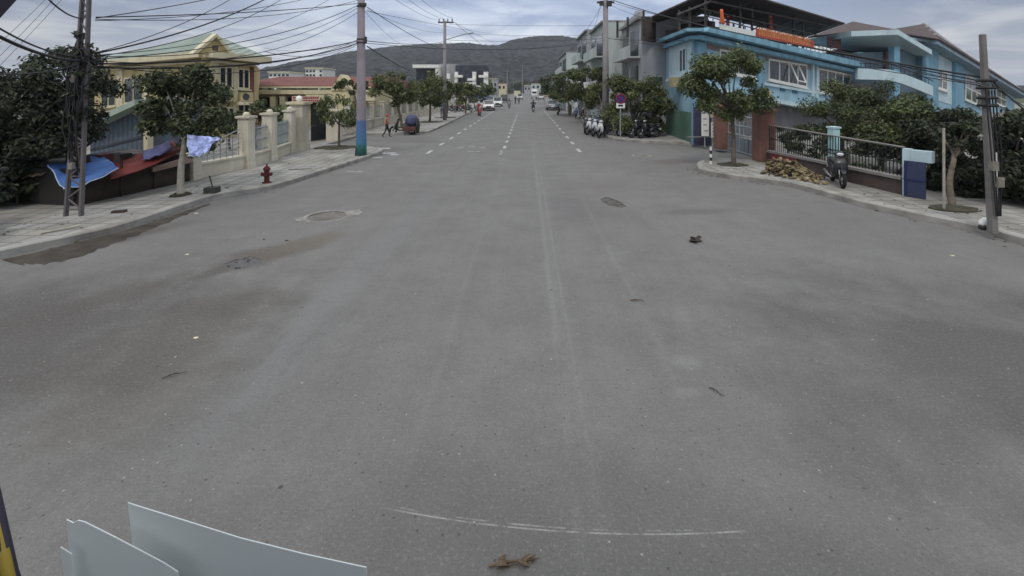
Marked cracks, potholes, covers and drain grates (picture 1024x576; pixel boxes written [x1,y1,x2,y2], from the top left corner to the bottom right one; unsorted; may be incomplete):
pothole [601,197,626,208]
manhole cover [294,209,363,223]
pothole [226,256,262,269]
